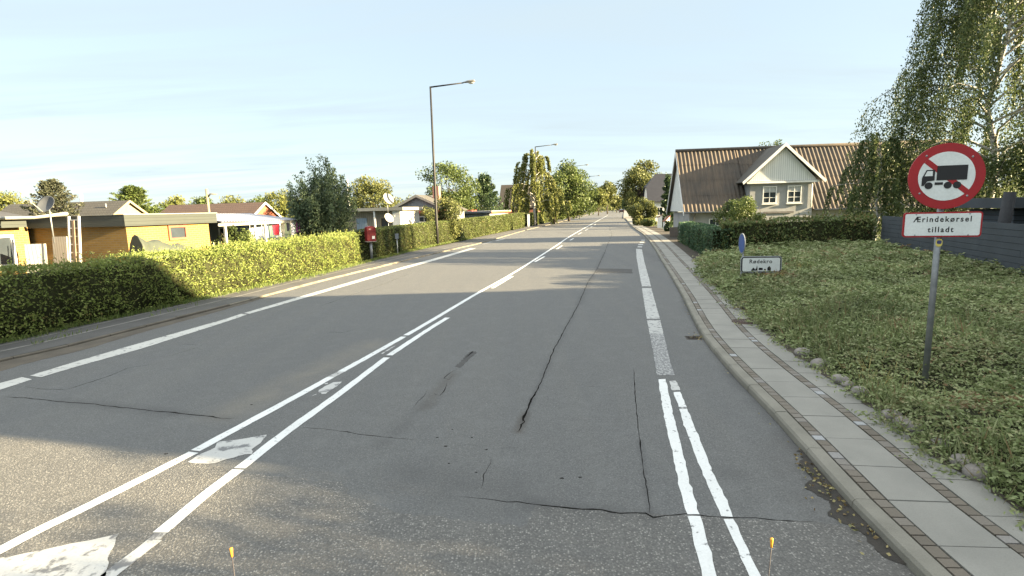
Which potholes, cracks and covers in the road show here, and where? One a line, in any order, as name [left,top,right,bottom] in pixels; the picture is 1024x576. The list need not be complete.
crack [519,231,612,430]
crack [470,373,815,522]
crack [13,363,229,419]
